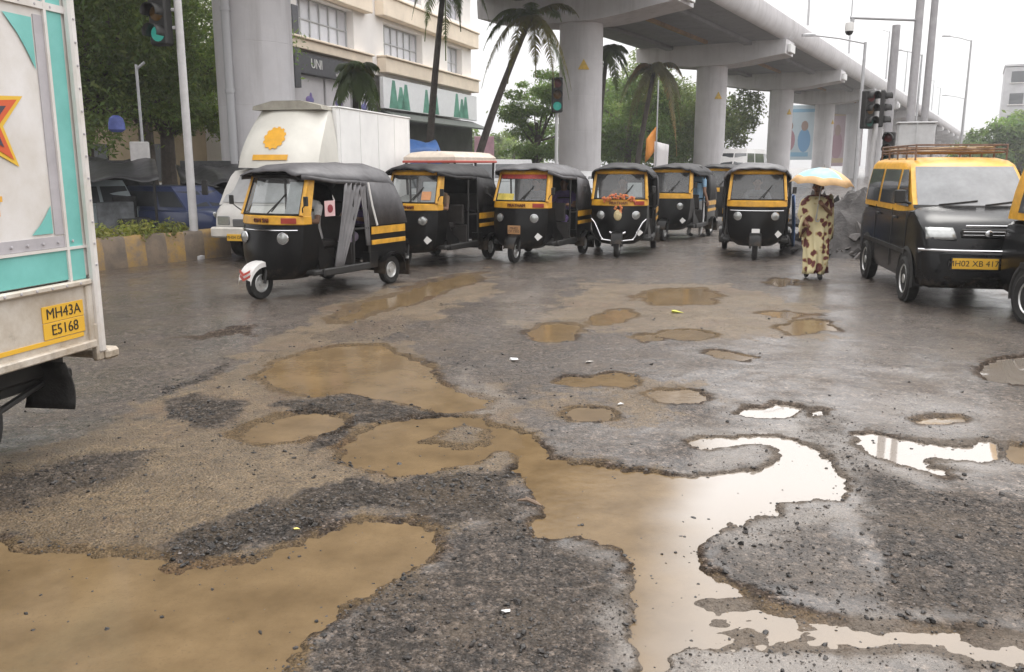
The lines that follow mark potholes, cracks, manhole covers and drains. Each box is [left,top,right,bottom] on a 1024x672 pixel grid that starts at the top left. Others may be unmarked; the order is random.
pothole [331,413,531,479]
pothole [973,353,1024,386]
pothole [904,412,973,426]
pothole [654,328,722,341]
pothole [548,370,645,389]
pothole [803,405,836,418]
pothole [248,342,502,415]
pothole [585,308,642,326]
pothole [628,332,667,343]
pothole [556,404,622,423]
pothole [319,271,491,325]
pothole [639,387,713,405]
